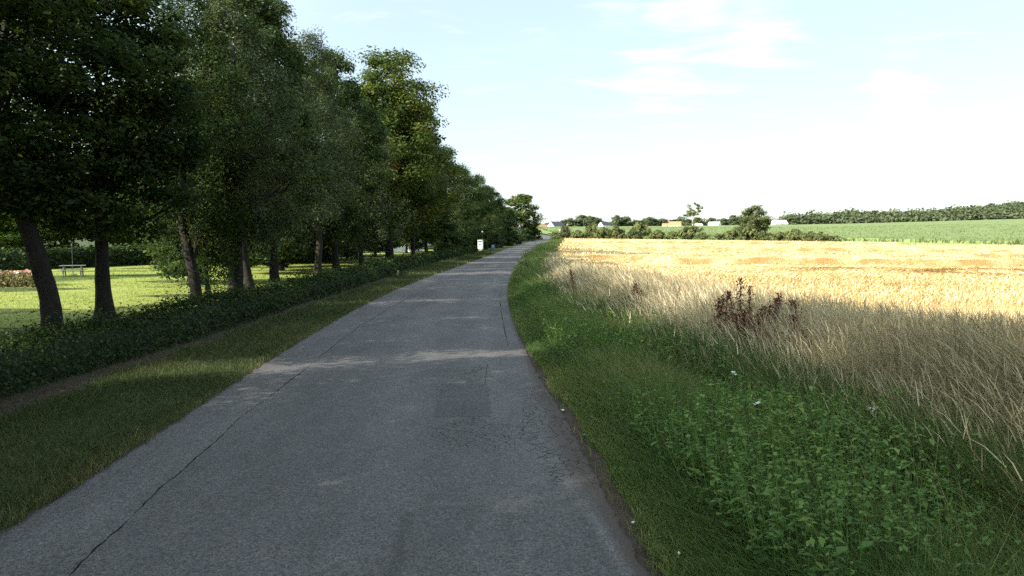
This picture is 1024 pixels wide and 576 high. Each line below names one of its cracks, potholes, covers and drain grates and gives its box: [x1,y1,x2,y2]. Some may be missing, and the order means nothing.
crack [434,385,595,485]
crack [69,299,405,576]
